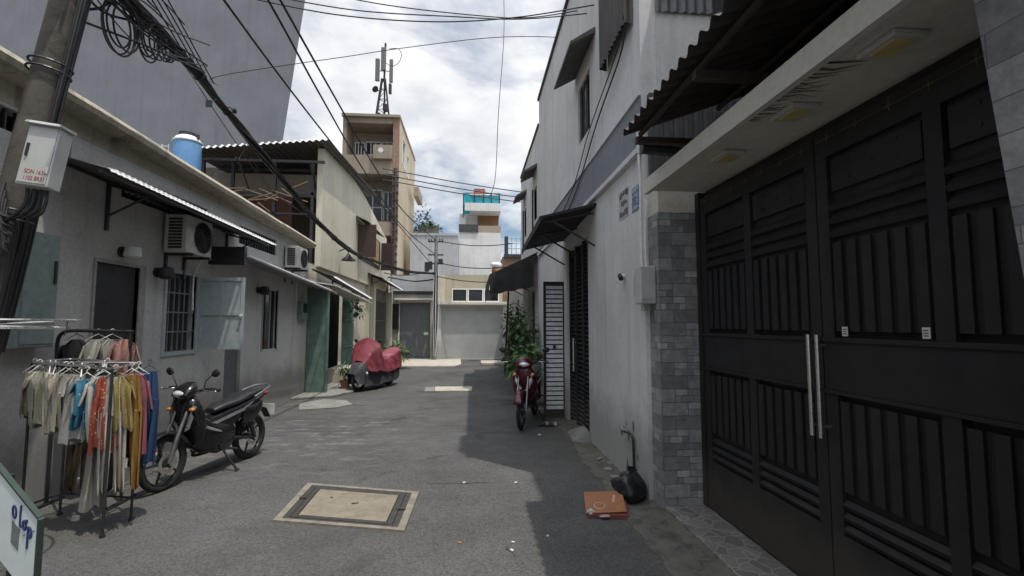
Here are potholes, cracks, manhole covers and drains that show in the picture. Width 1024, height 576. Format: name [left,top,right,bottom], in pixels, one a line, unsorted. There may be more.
manhole cover [273,483,419,532]
